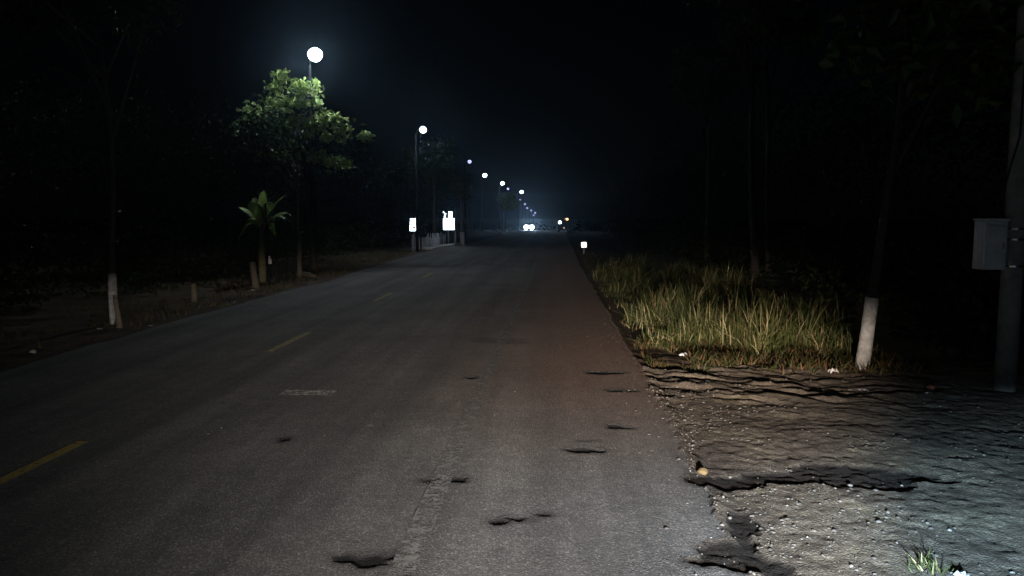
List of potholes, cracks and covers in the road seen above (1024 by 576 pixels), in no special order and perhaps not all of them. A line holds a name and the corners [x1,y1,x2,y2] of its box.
pothole [682,462,971,492]
pothole [420,476,468,484]
pothole [488,516,529,526]
pothole [681,508,800,576]
pothole [332,552,402,569]
